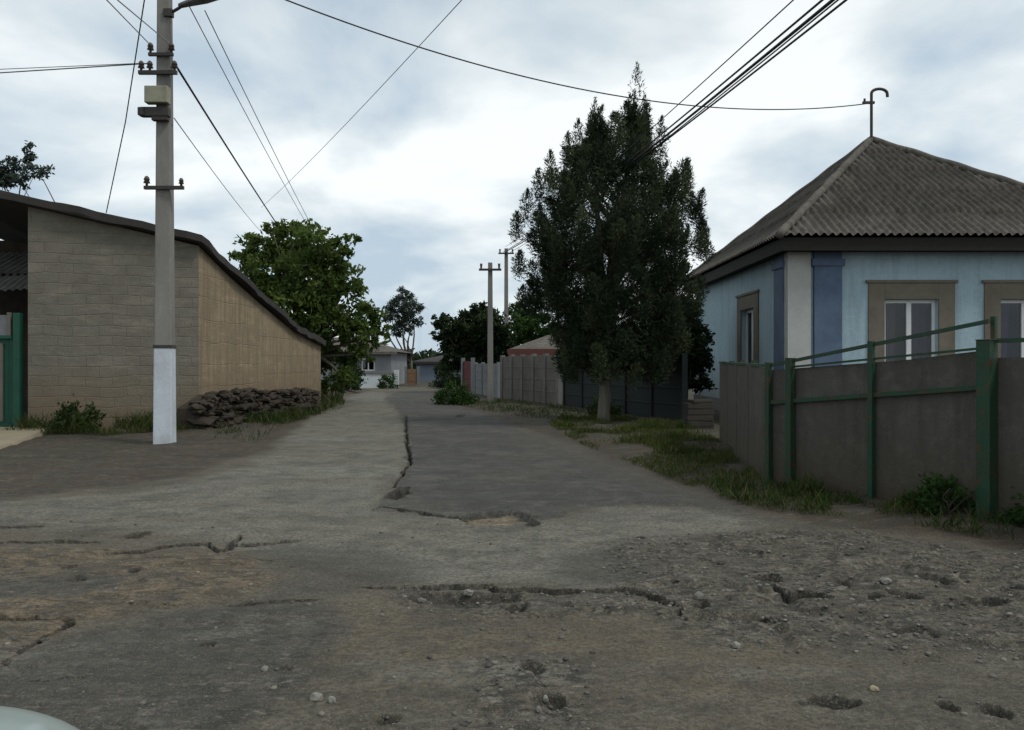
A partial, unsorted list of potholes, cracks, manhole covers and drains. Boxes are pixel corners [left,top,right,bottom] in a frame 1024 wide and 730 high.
pothole [934,699,962,712]
crack [227,599,318,607]
crack [0,525,300,562]
pothole [978,702,1017,720]
crack [392,414,413,488]
pothole [121,531,154,539]
crack [362,583,688,621]
pothole [793,694,863,710]
crack [0,615,83,682]
pothole [530,687,567,711]
pothole [460,510,540,526]
crack [372,507,461,520]
